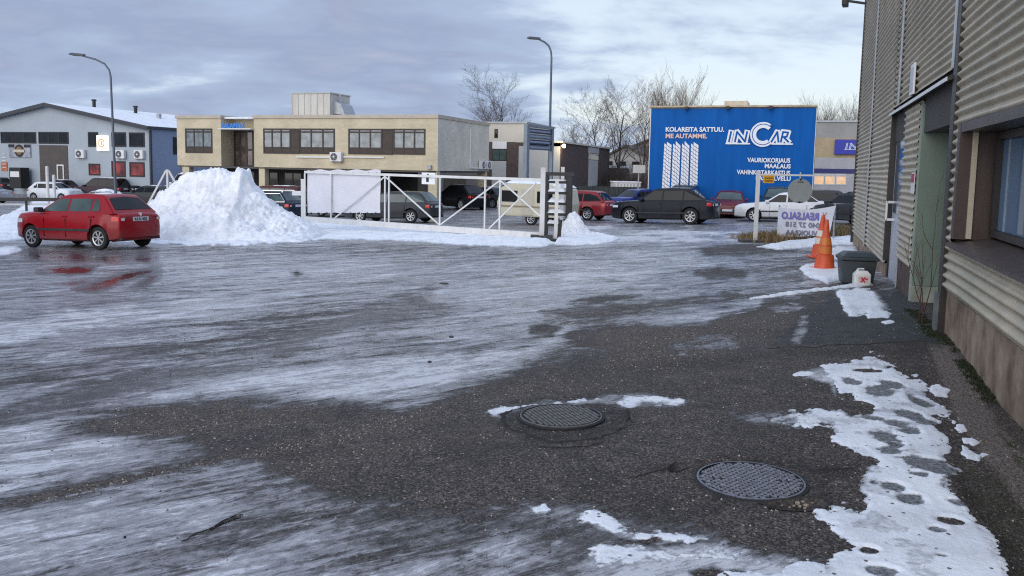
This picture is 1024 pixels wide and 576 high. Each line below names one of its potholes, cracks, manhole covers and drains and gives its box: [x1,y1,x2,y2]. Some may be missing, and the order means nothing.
manhole cover [693,461,810,502]
crack [634,467,677,479]
manhole cover [517,404,605,431]
